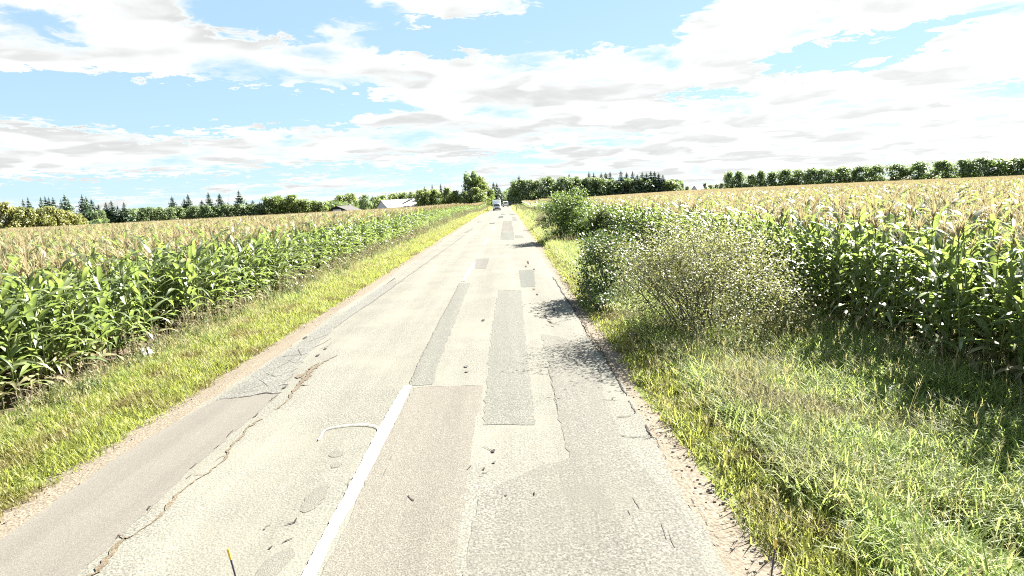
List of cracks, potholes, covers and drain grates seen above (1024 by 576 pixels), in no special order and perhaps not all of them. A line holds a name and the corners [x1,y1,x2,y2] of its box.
crack [86,333,337,576]
